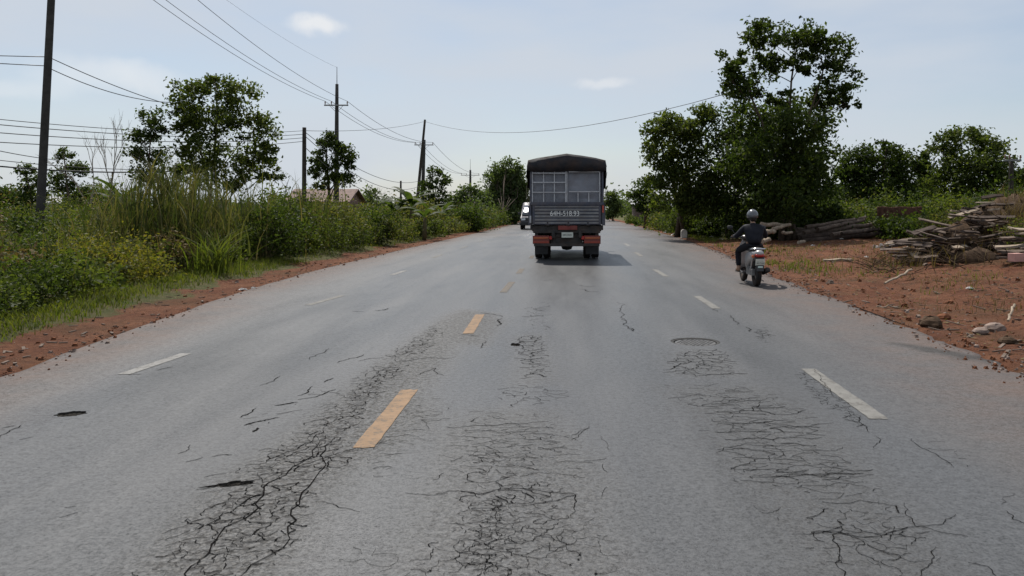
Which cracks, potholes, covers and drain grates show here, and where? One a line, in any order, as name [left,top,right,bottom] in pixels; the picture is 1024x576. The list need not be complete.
crack [662,349,744,377]
manhole cover [671,338,720,346]
crack [339,411,618,576]
crack [59,322,449,576]
crack [502,307,566,406]
crack [674,385,968,576]
